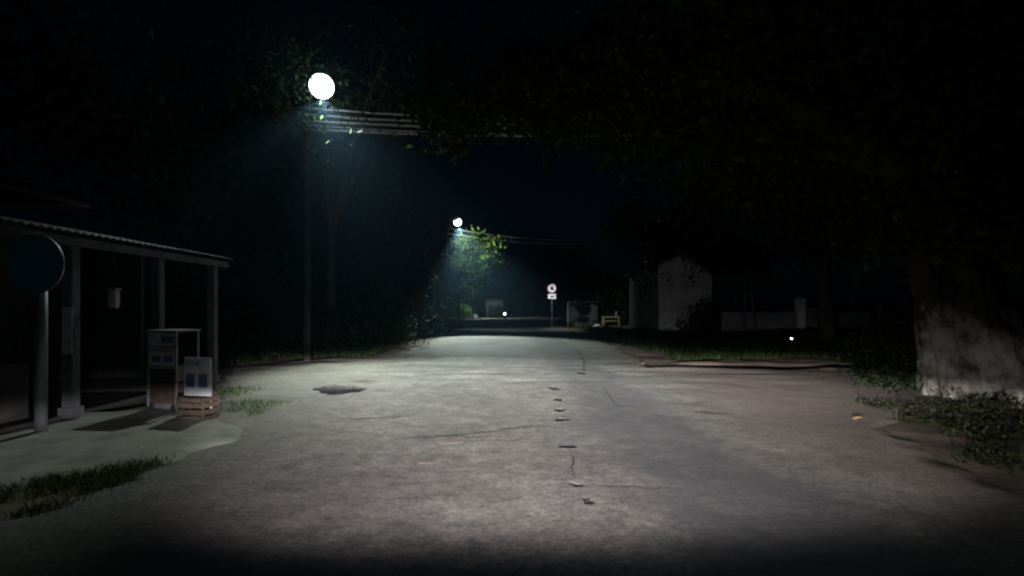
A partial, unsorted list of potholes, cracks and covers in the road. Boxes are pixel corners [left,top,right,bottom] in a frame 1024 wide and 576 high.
pothole [572,493,606,508]
pothole [558,479,595,490]
pothole [550,442,585,450]
crack [408,426,552,438]
pothole [308,385,372,396]
